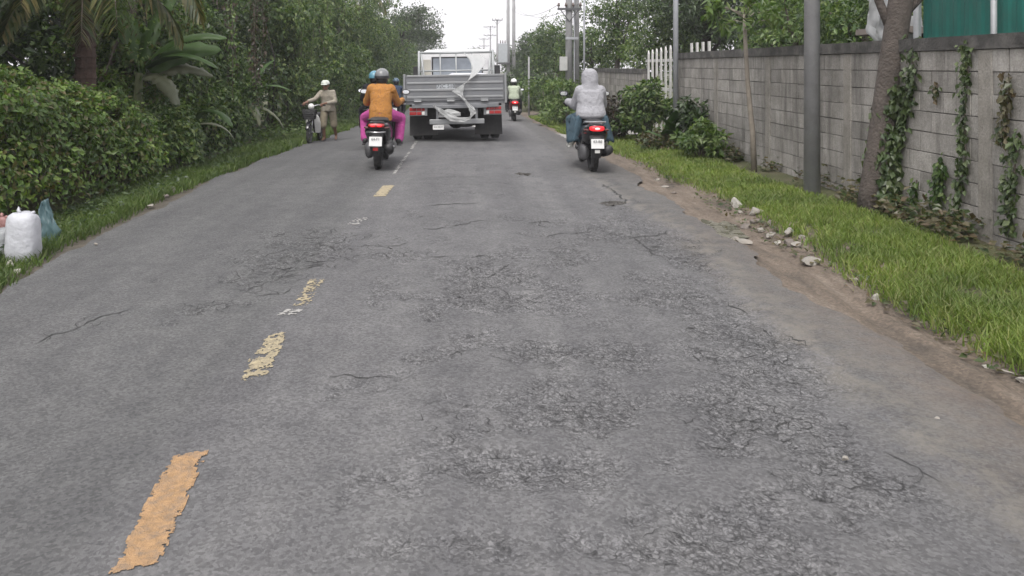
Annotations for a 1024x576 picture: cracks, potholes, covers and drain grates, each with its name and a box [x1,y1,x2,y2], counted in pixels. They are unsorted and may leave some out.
crack [37,306,139,343]
crack [450,339,585,366]
crack [595,291,704,309]
crack [168,203,484,317]
crack [447,255,540,311]
crack [530,221,684,265]
crack [671,324,944,506]
crack [415,398,654,482]
